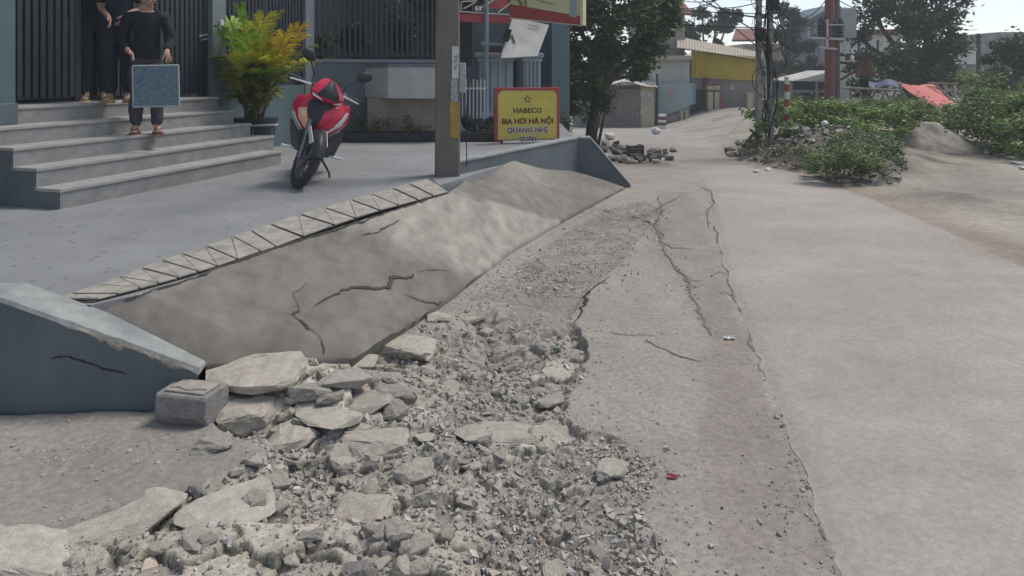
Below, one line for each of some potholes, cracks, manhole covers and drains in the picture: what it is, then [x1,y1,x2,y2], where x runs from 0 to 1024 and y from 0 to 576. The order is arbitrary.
crack [292,269,450,353]
crack [555,186,827,540]
pothole [58,299,678,576]
